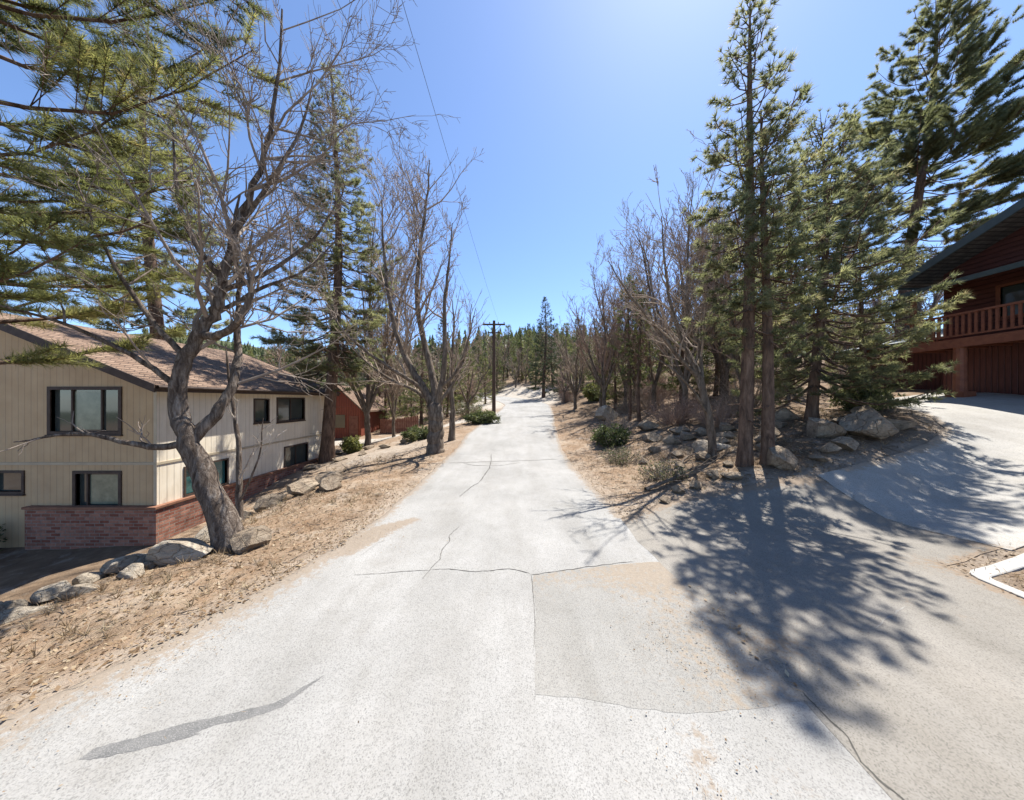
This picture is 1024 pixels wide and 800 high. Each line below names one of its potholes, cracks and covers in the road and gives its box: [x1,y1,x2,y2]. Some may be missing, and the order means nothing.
crack [361,530,624,648]
crack [449,458,547,496]
